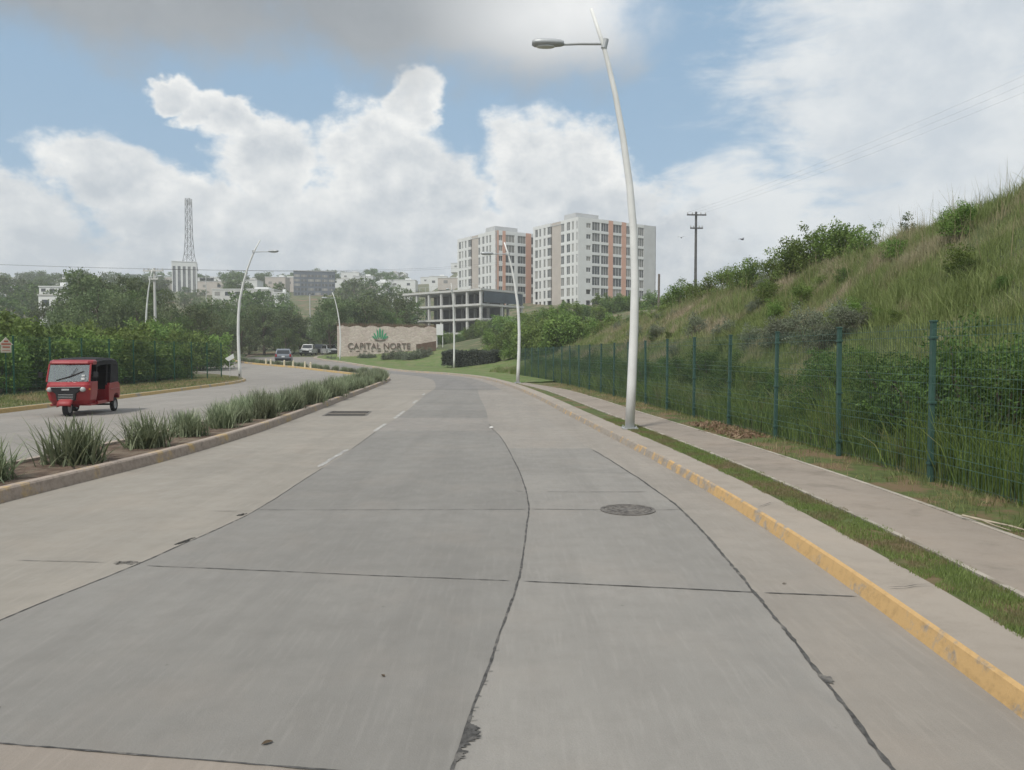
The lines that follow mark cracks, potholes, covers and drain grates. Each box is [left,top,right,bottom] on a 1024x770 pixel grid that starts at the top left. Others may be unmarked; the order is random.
manhole cover [600,504,656,516]
